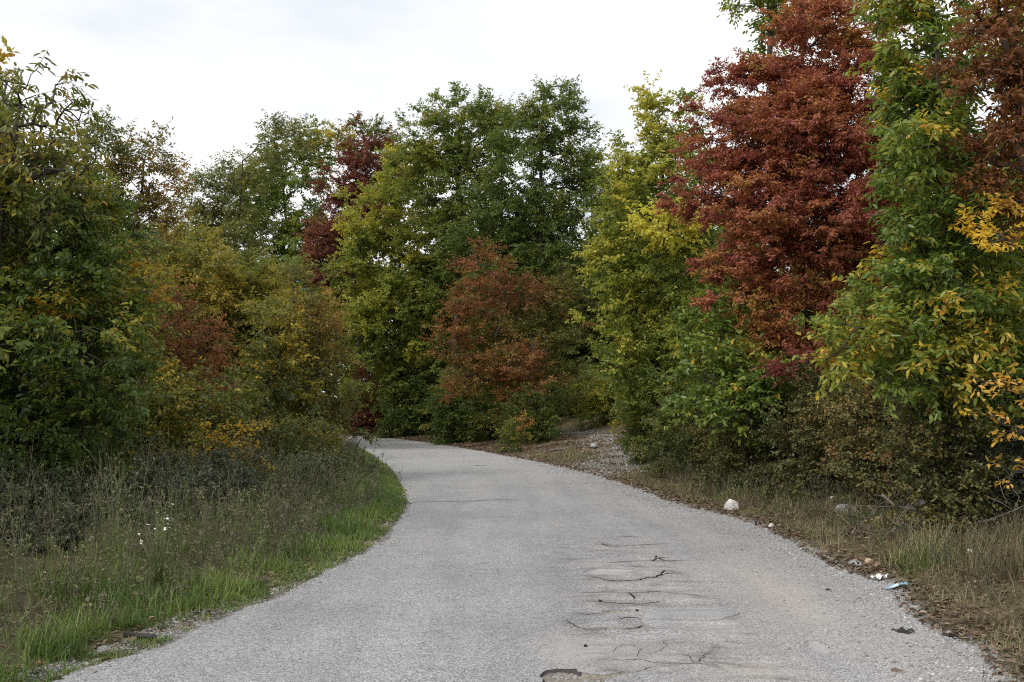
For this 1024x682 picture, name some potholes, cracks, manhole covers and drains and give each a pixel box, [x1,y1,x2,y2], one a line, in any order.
pothole [540,669,641,682]
crack [569,544,713,673]
